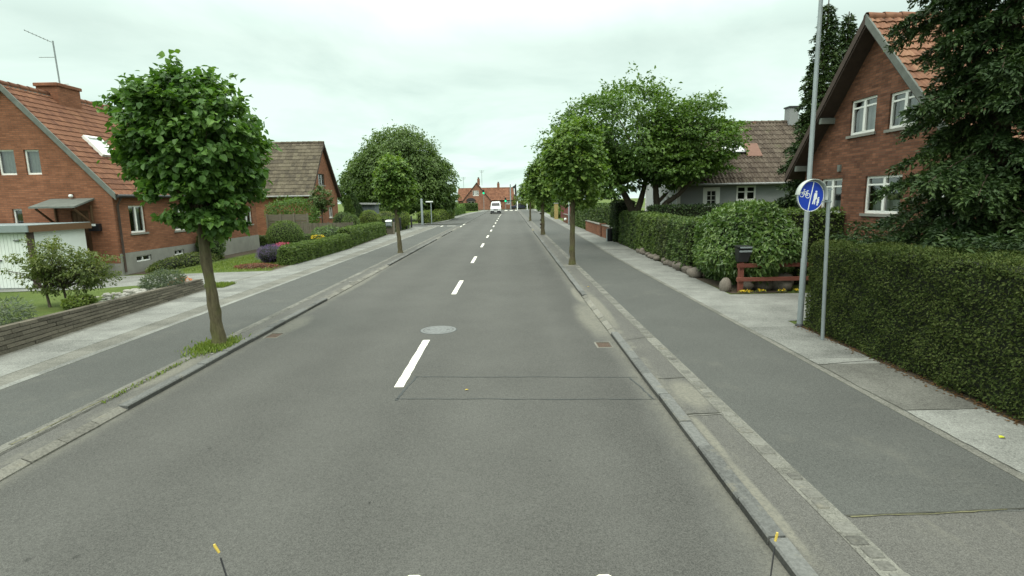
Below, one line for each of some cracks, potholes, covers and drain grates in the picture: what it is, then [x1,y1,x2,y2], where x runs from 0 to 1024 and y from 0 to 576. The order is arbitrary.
manhole cover [420,326,457,334]
